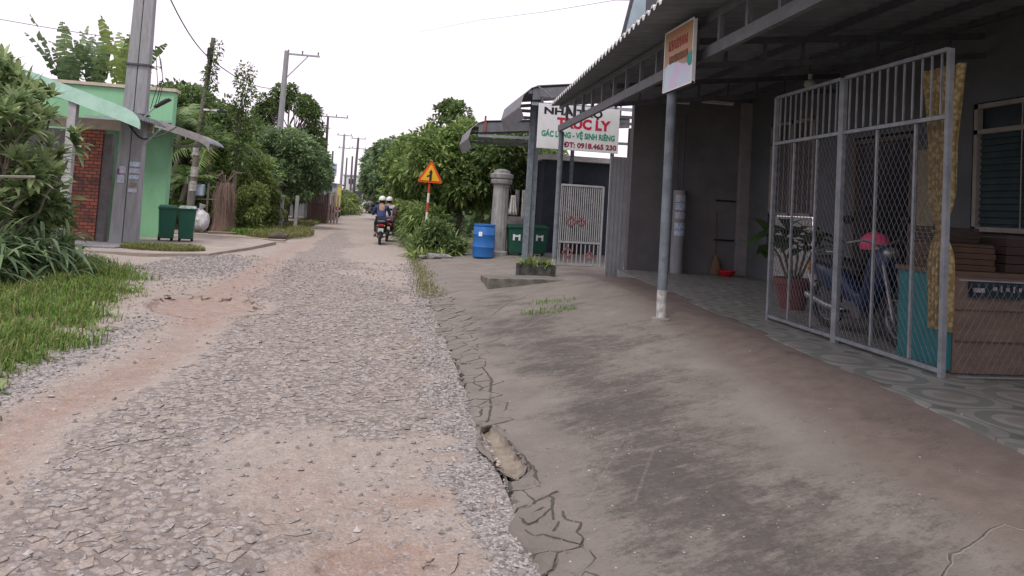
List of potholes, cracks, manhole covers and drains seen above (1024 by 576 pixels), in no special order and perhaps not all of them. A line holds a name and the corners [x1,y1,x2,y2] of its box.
crack [0,279,599,576]
pothole [475,421,527,482]
pothole [130,293,280,321]
crack [939,523,1024,576]
